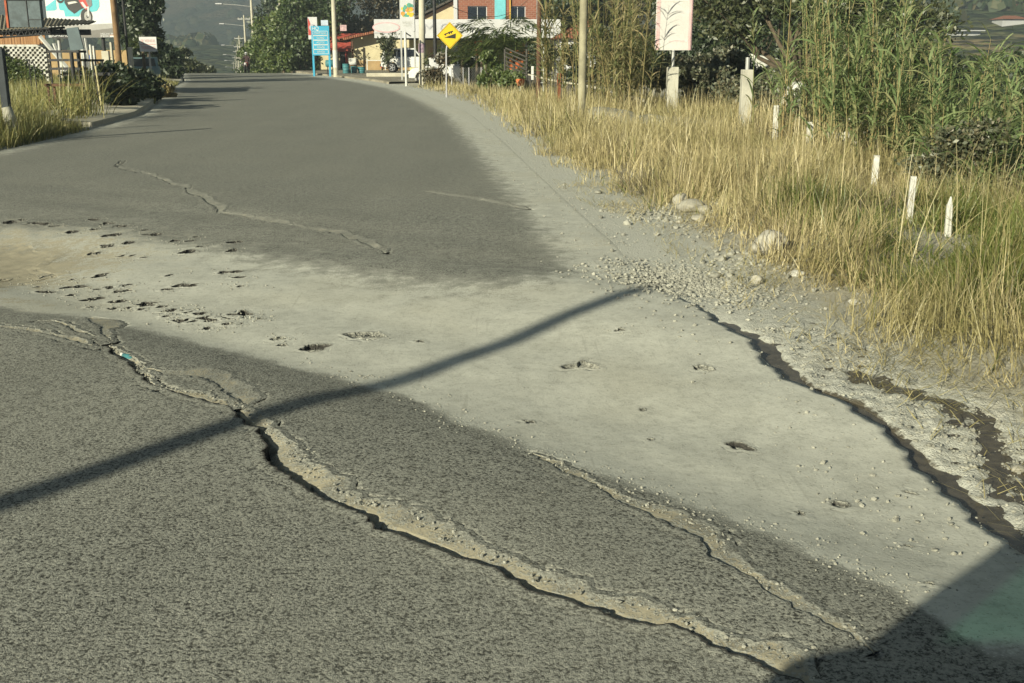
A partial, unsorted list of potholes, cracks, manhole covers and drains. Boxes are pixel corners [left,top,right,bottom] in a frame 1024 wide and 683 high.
pothole [715,438,767,455]
pothole [165,317,205,325]
pothole [553,359,607,371]
pothole [0,240,71,287]
crack [113,160,391,254]
pothole [85,271,115,280]
pothole [221,308,260,320]
pothole [95,242,118,250]
pothole [292,342,339,354]
crack [424,191,530,210]
pothole [181,314,226,325]
crack [0,317,883,683]
